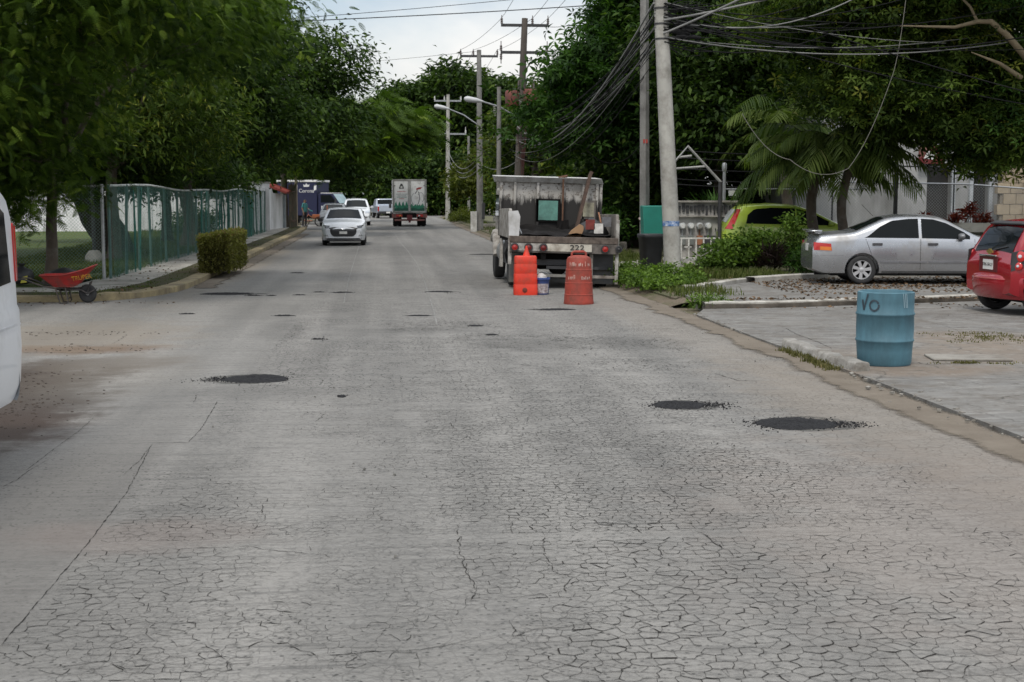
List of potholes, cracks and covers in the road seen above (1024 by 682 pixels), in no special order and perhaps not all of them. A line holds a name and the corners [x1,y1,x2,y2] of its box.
crack [0,320,1024,682]
